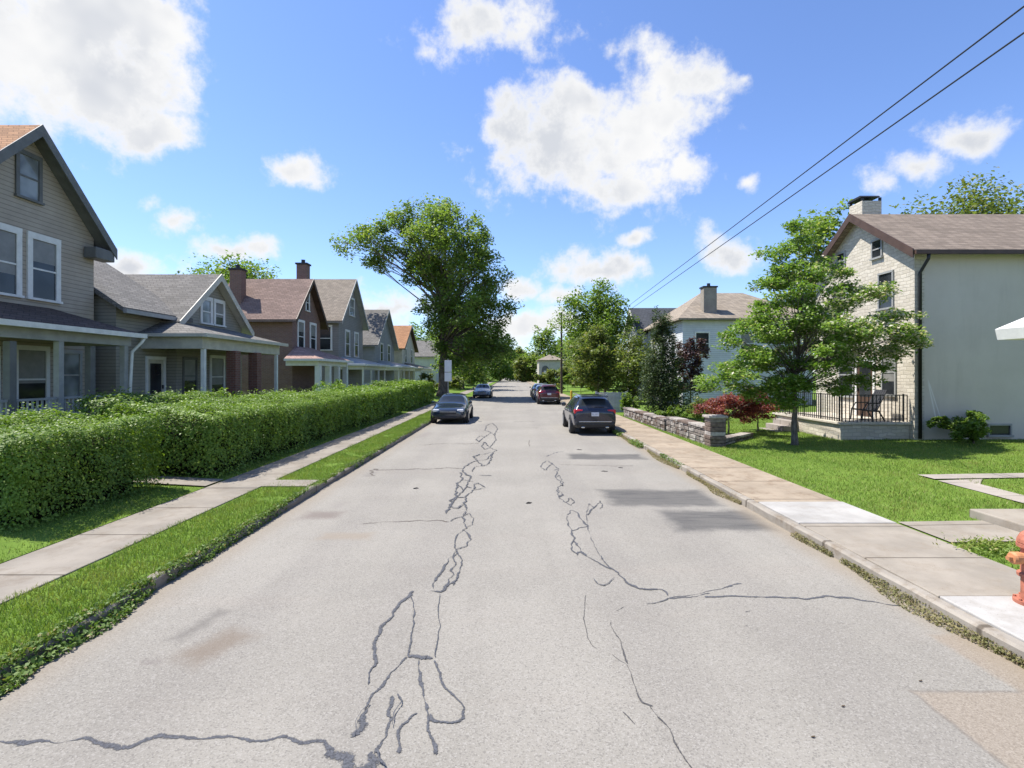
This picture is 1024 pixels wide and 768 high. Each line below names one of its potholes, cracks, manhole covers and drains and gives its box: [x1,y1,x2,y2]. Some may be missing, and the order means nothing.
crack [610,607,692,768]
crack [529,445,899,648]
crack [0,423,498,768]
